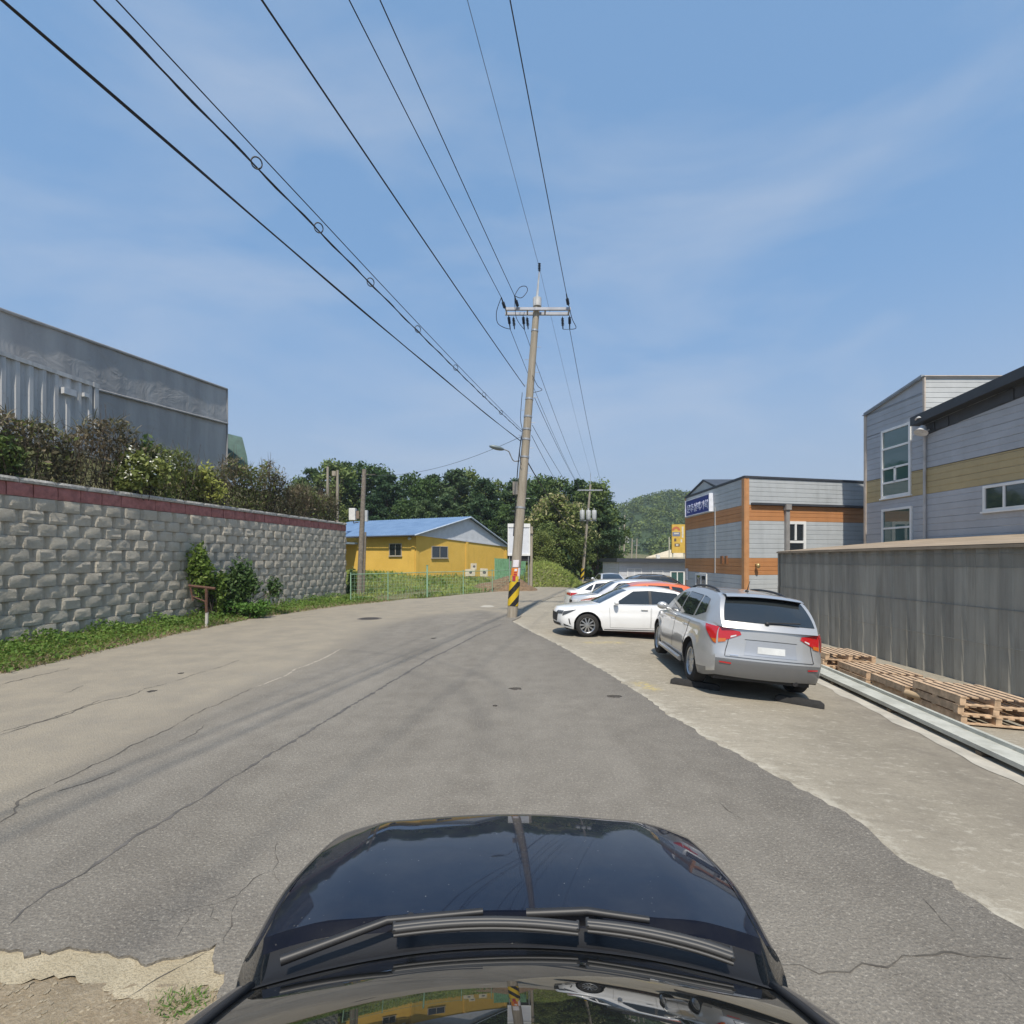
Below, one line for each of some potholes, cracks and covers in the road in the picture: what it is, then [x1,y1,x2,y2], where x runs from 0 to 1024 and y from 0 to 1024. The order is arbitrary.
crack [782,951,1021,982]
crack [86,841,279,998]
crack [11,624,501,923]
